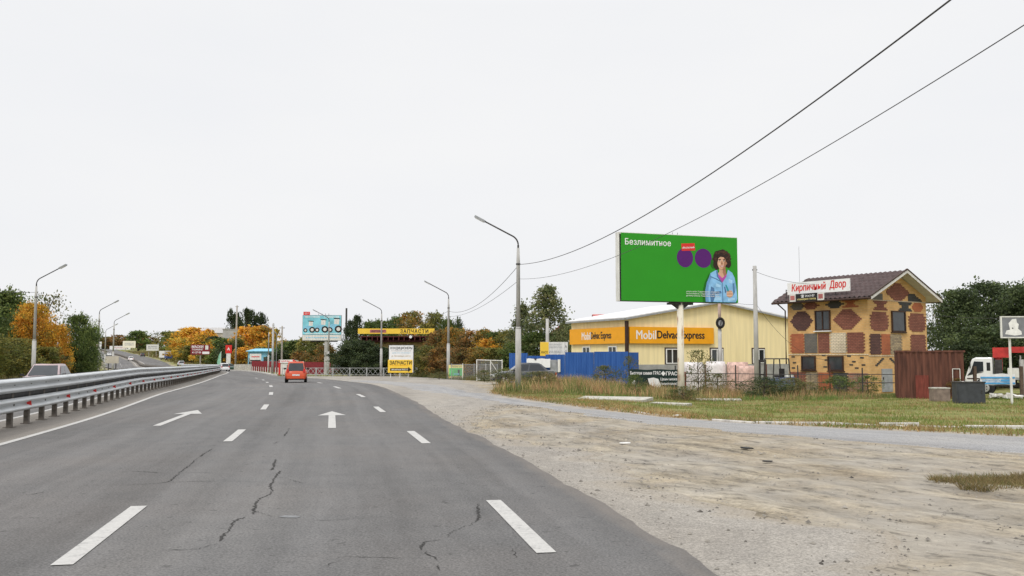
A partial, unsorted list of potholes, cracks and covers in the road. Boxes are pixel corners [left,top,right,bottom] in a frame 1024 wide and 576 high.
crack [133,428,306,550]
crack [419,504,481,569]
